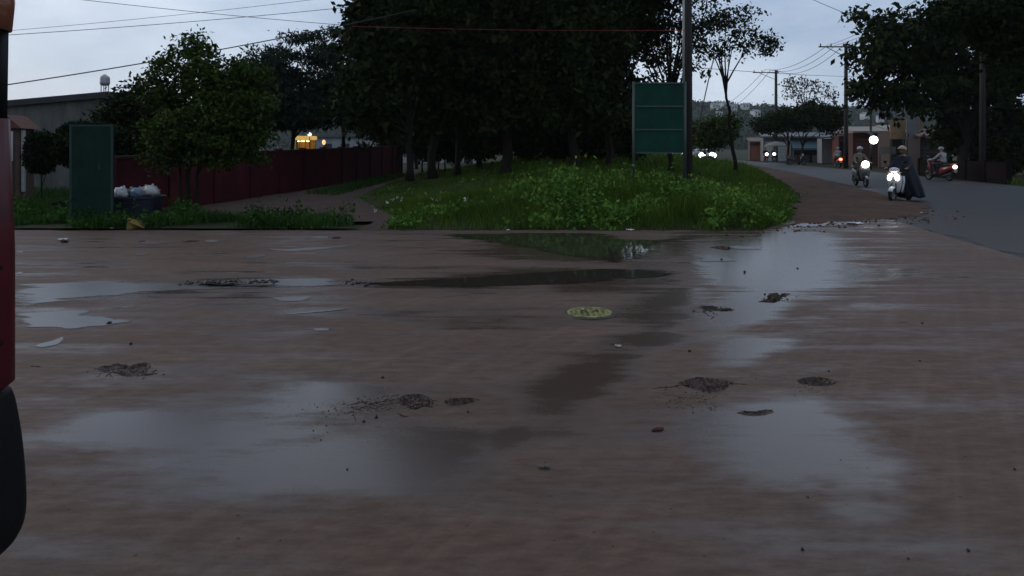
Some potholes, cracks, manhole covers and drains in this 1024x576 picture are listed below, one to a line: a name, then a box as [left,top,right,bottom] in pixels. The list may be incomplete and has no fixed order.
pothole [678,377,734,394]
pothole [758,293,790,303]
pothole [398,394,436,410]
pothole [444,397,480,406]
pothole [797,377,839,386]
manhole cover [564,307,615,320]
pothole [97,362,159,377]
